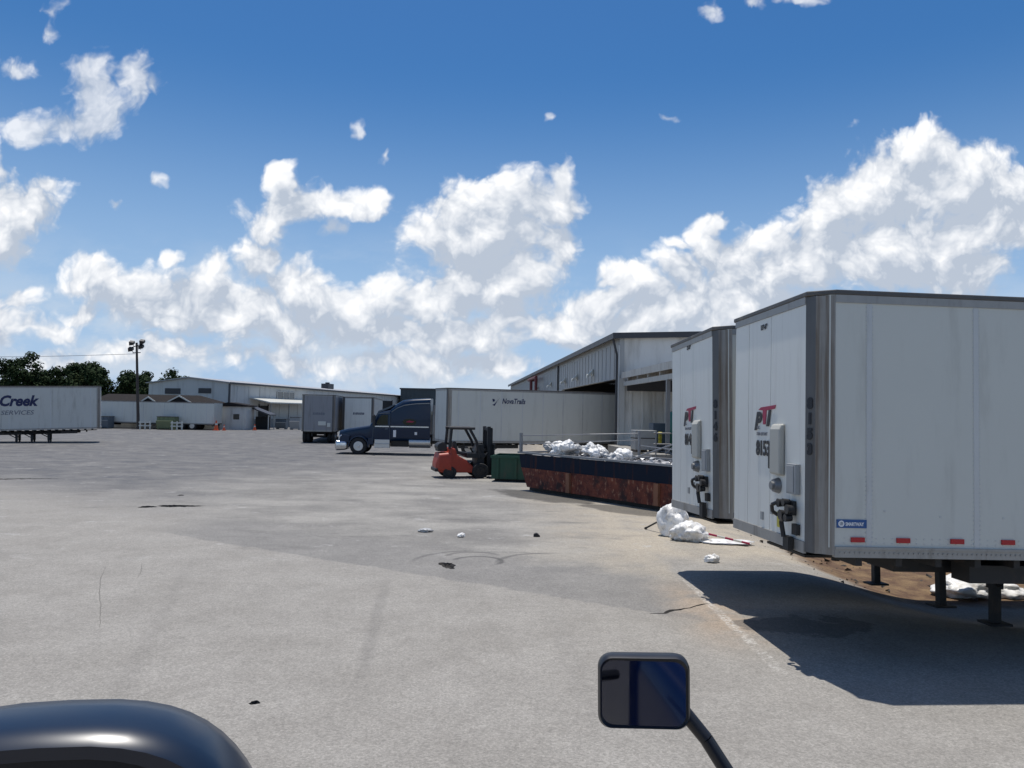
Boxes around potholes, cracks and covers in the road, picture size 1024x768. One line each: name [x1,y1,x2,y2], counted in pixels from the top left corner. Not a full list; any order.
crack [652,603,710,614]
